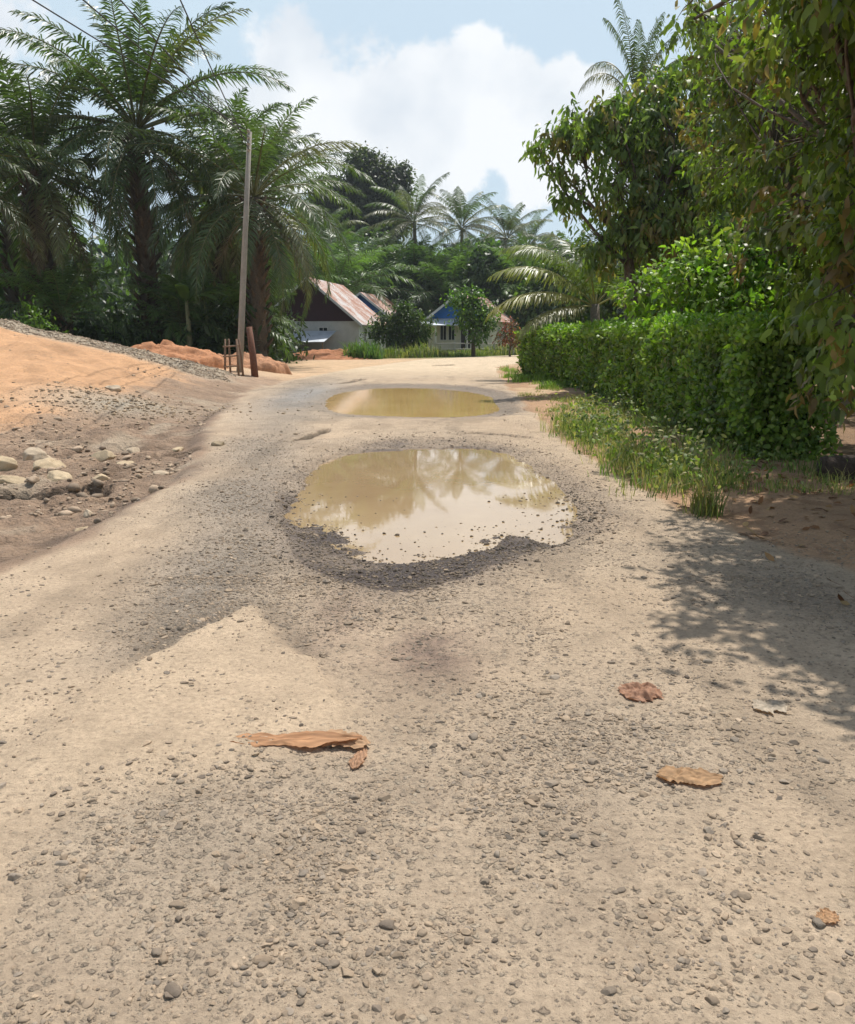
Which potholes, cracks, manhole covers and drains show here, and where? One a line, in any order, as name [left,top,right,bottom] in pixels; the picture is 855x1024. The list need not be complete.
pothole [273,438,611,592]
pothole [311,383,520,418]
